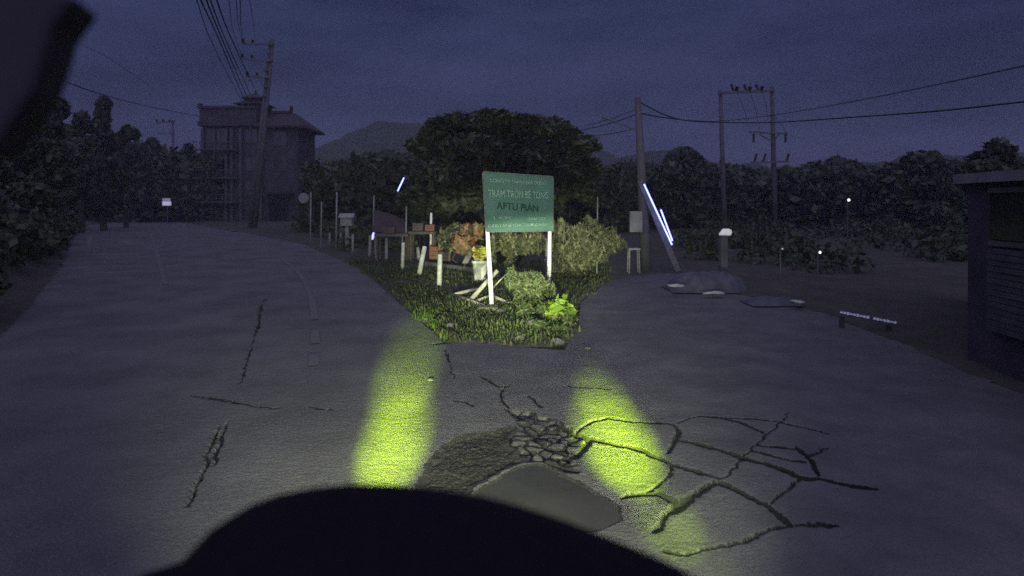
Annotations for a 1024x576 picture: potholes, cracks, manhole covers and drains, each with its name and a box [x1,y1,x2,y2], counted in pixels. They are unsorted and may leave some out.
crack [453,376,879,557]
pothole [471,463,624,532]
crack [189,423,228,507]
crack [190,299,279,409]
crack [434,342,456,377]
